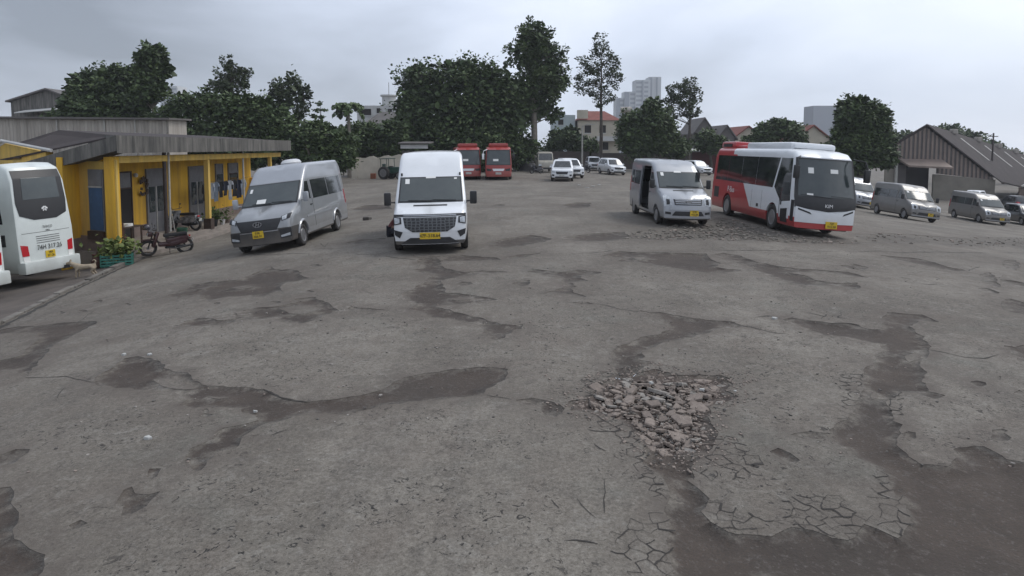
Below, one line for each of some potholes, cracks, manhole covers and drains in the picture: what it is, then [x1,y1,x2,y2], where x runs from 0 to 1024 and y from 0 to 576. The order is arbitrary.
crack [572,414,675,576]
crack [693,431,763,480]
crack [701,470,916,539]
pothole [566,369,738,457]
